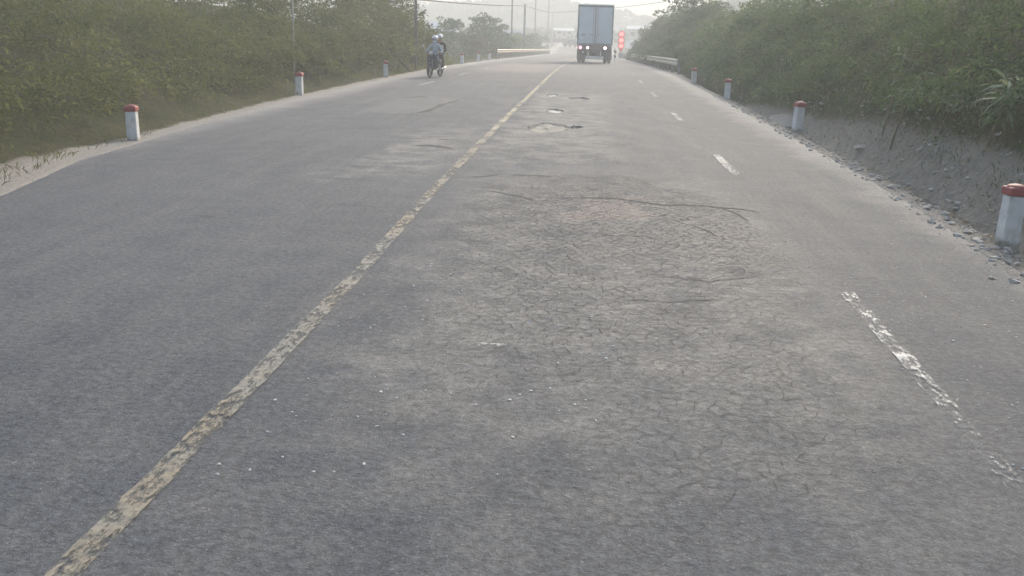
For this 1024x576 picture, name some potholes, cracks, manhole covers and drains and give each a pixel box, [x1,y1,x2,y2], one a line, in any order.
pothole [527,123,570,133]
crack [398,96,458,113]
crack [365,174,927,560]
crack [417,139,453,149]
